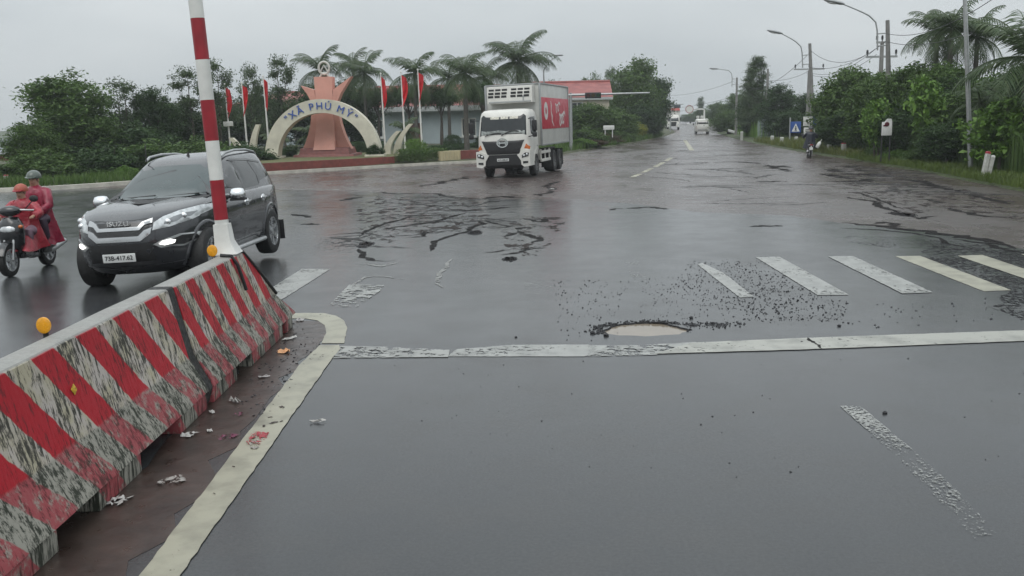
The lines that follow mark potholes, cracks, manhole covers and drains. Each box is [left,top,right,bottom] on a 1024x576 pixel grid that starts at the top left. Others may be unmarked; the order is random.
crack [608,144,1024,289]
crack [291,176,560,261]
pothole [584,319,745,336]
